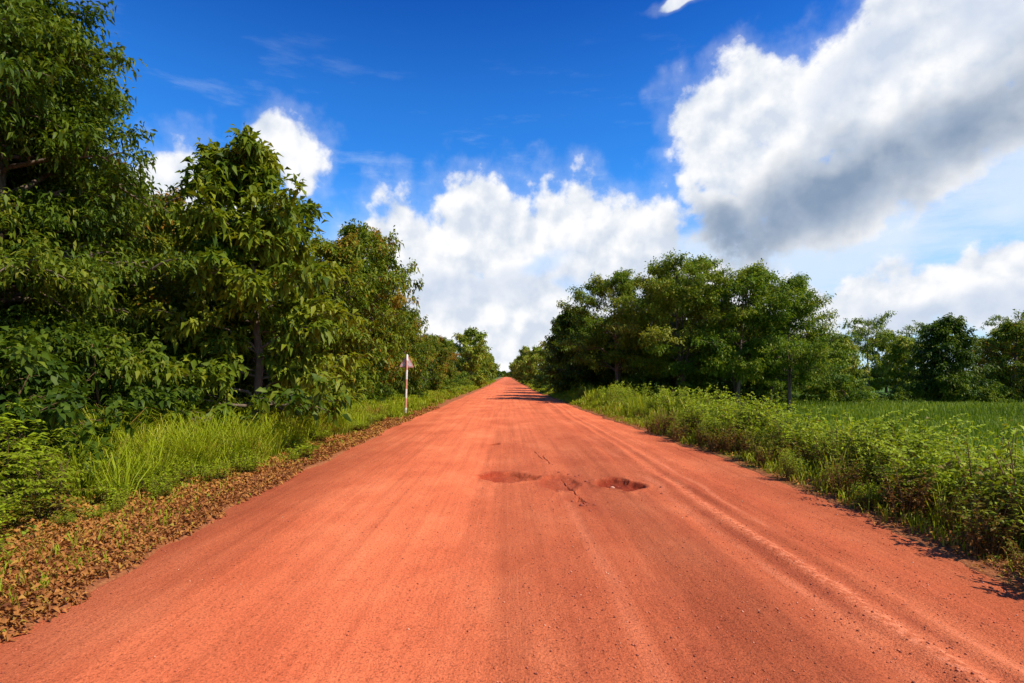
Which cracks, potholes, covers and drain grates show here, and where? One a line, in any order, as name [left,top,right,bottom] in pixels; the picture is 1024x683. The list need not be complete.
pothole [594,477,647,491]
pothole [476,472,542,483]
